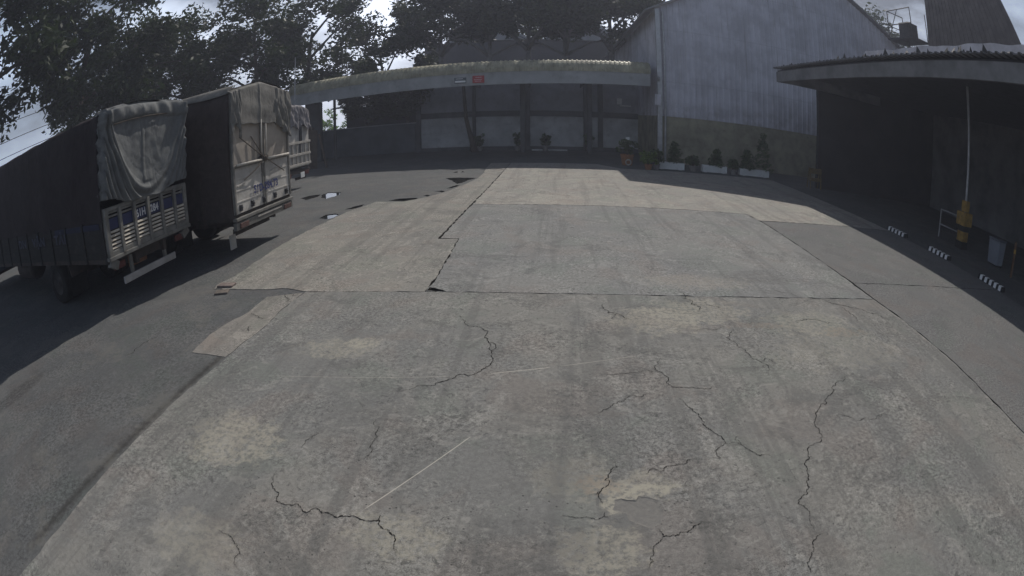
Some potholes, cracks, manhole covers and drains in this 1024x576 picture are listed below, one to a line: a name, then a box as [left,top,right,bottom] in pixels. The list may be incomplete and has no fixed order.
crack [271,480,396,553]
crack [604,355,769,457]
crack [798,379,907,572]
crack [402,319,496,391]
crack [563,466,617,520]
